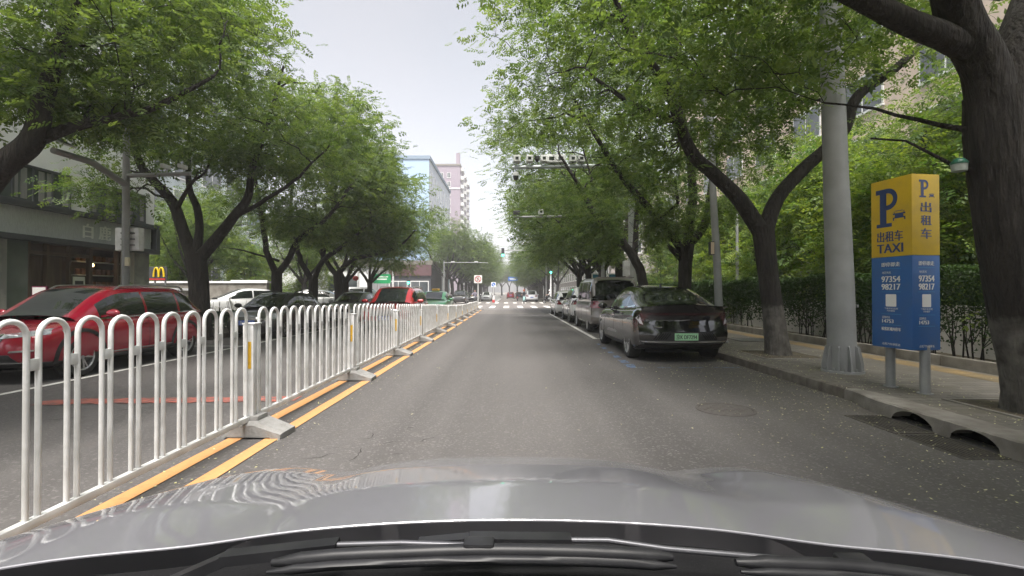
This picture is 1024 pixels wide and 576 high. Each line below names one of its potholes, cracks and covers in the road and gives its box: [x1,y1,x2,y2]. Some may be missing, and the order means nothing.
manhole cover [695,402,757,417]
drain grate [844,388,1024,463]
